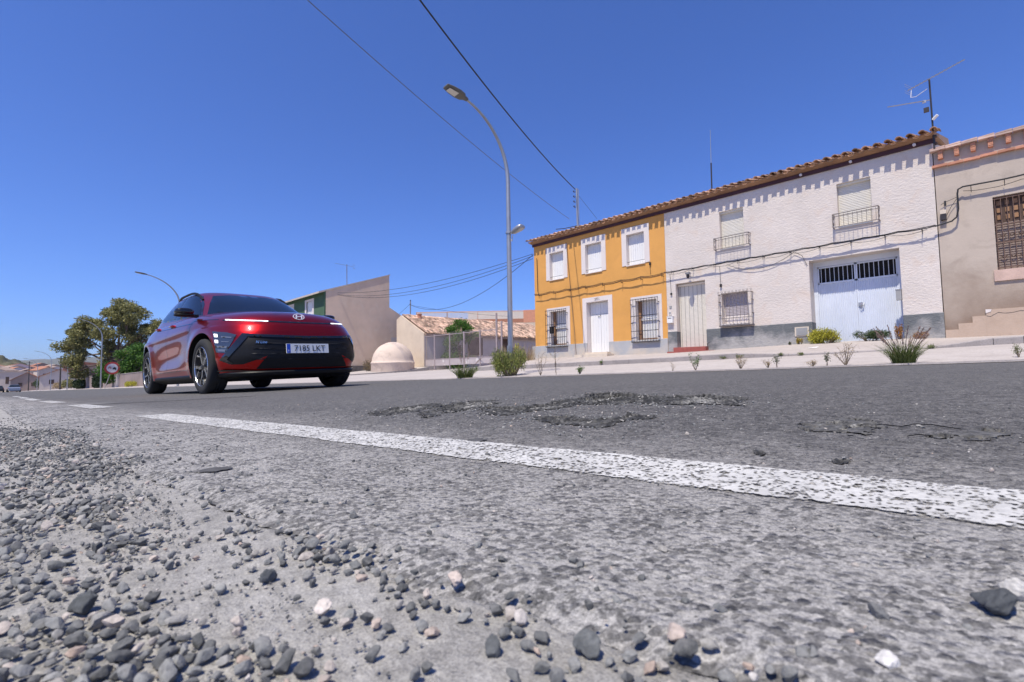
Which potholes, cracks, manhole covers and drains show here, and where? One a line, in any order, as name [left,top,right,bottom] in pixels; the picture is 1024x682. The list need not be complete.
pothole [534,412,657,428]
crack [882,423,961,437]
pothole [474,398,588,416]
pothole [368,403,445,416]
pothole [571,392,666,405]
pothole [654,394,749,406]
pothole [428,400,502,413]
